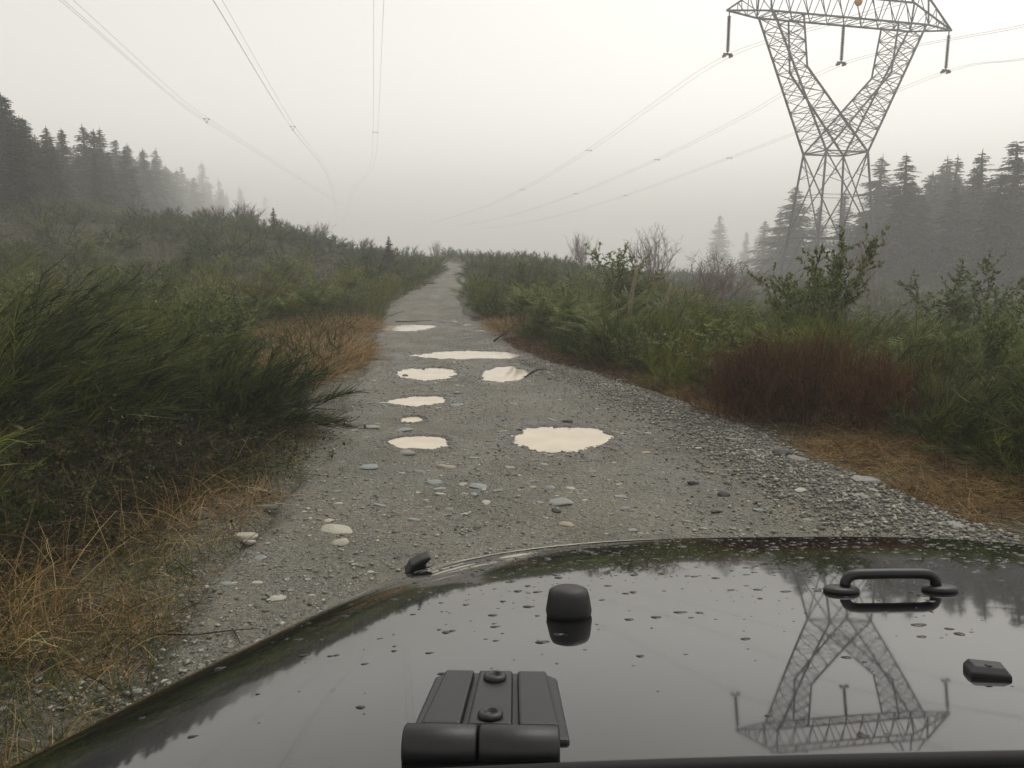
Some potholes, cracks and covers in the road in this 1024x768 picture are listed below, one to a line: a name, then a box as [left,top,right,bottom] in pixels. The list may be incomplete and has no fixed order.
pothole [376,322,452,334]
pothole [371,392,462,409]
pothole [365,432,469,453]
pothole [381,348,538,363]
pothole [468,361,542,385]
pothole [378,362,472,385]
pothole [485,420,637,462]
pothole [393,414,432,424]
